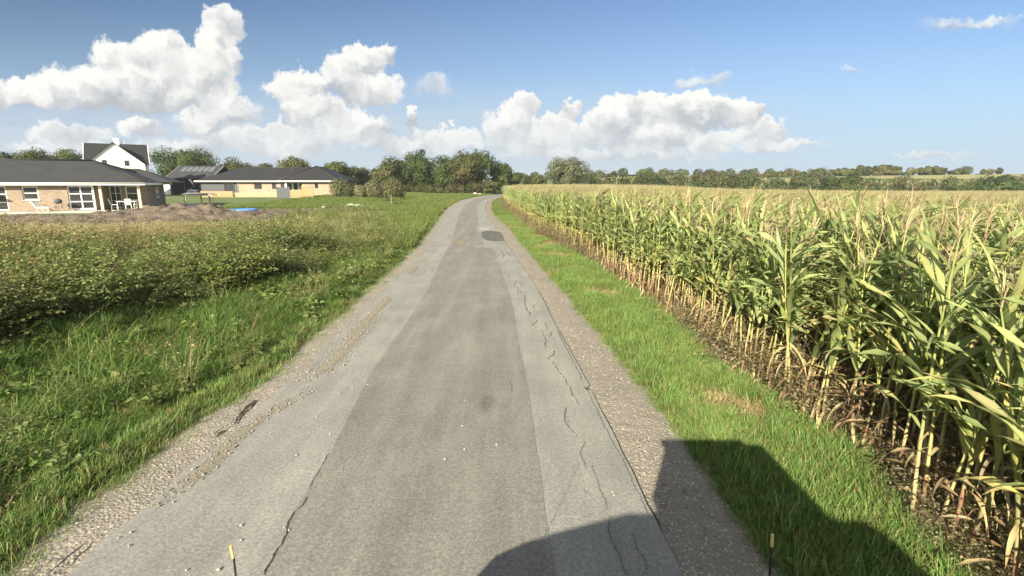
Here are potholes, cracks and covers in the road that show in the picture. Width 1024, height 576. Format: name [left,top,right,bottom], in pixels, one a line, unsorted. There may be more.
crack [459,249,649,575]
crack [264,453,347,574]
